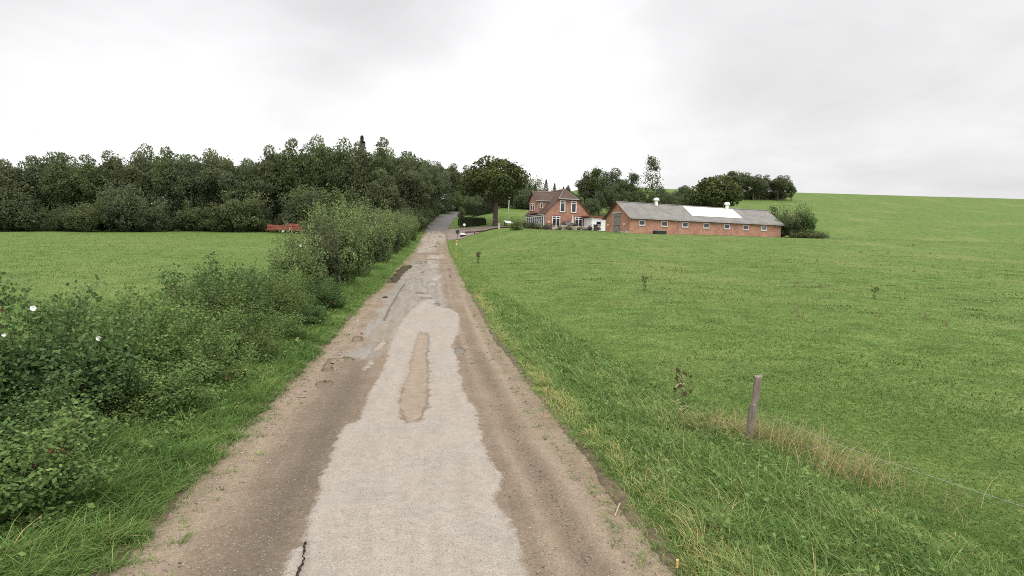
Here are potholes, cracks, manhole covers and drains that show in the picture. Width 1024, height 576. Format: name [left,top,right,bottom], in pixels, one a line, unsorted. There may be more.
pothole [395,331,433,424]
pothole [310,379,337,389]
crack [278,536,320,576]
crack [378,284,407,322]
pothole [317,357,344,373]
pothole [451,346,468,356]
pothole [389,265,413,284]
